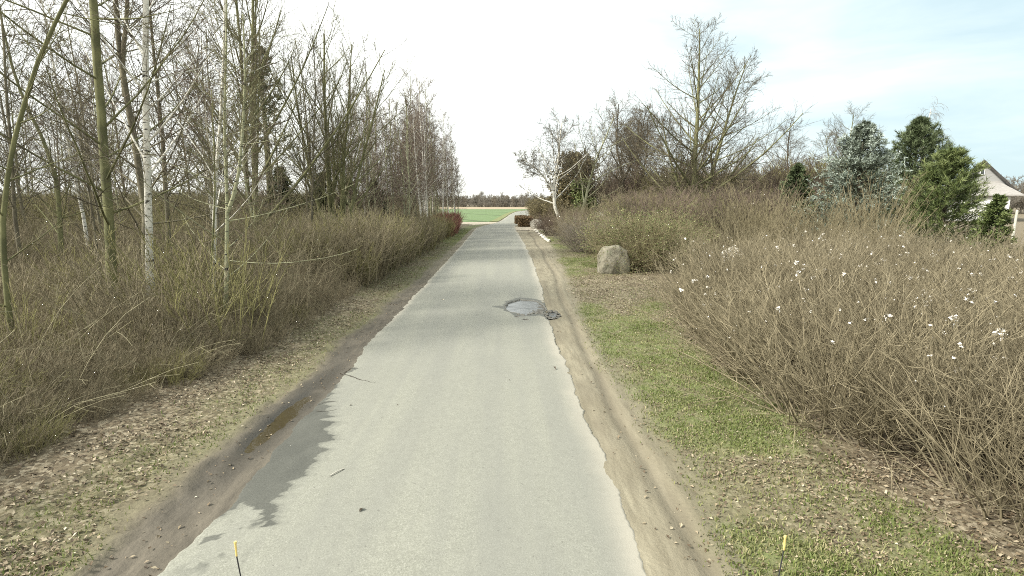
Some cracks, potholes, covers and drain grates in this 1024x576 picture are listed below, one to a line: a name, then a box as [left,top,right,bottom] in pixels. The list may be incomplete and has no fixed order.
pothole [544,310,561,320]
pothole [504,299,547,316]
